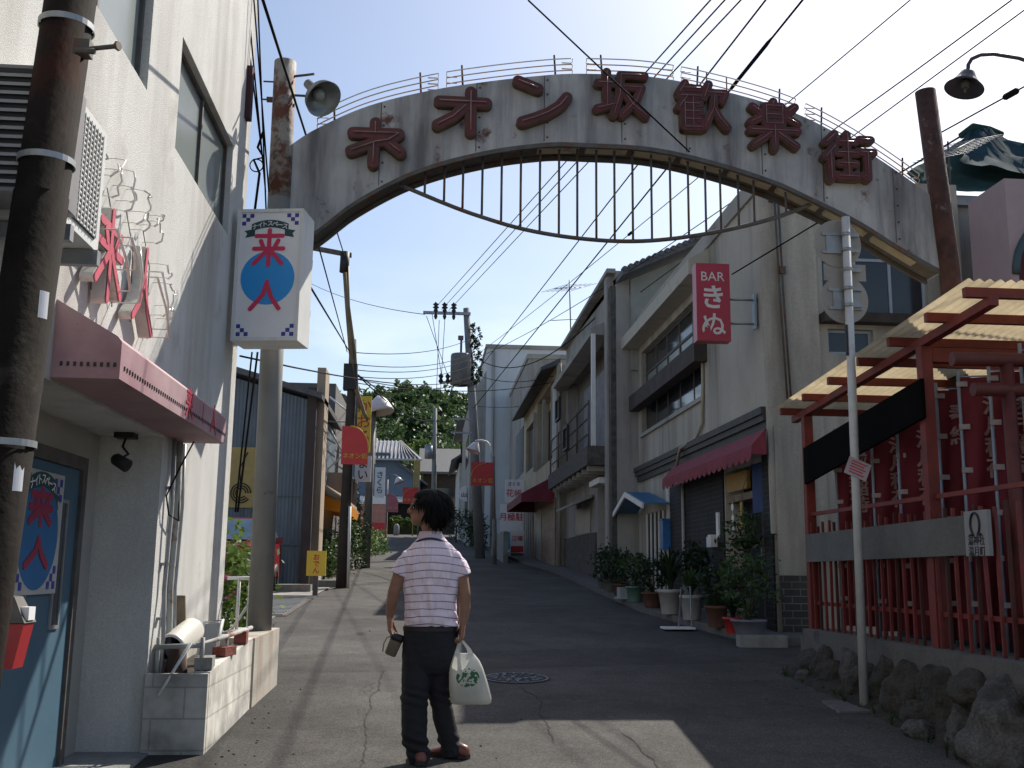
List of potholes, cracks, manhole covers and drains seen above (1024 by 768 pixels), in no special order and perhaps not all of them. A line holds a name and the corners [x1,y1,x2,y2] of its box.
crack [520,687,554,741]
crack [358,671,385,768]
manhole cover [485,672,551,684]
